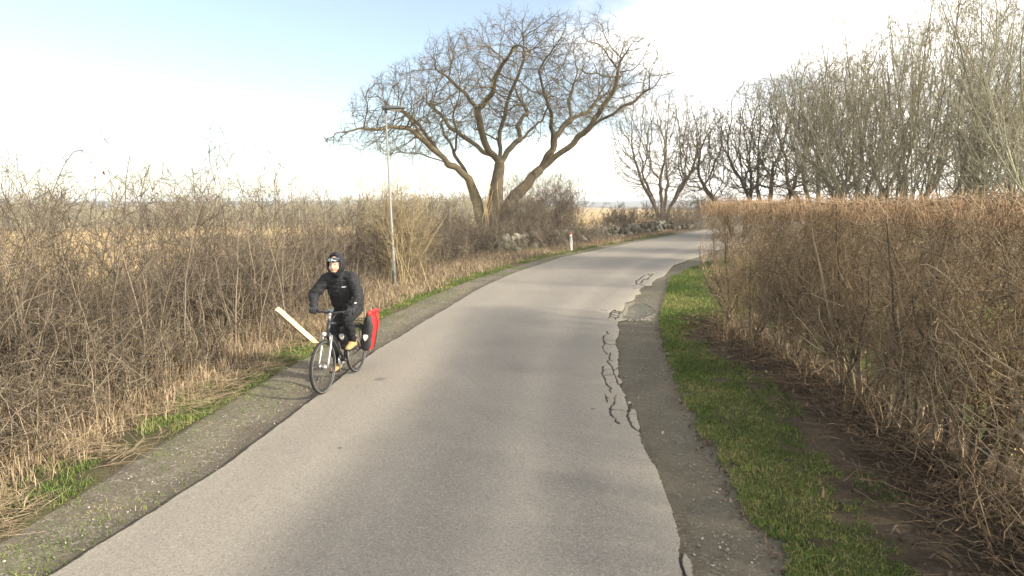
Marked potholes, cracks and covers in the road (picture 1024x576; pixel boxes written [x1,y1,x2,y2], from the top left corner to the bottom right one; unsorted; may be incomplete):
pothole [619,301,657,320]
crack [630,272,658,289]
crack [600,309,640,432]
crack [676,544,689,576]
